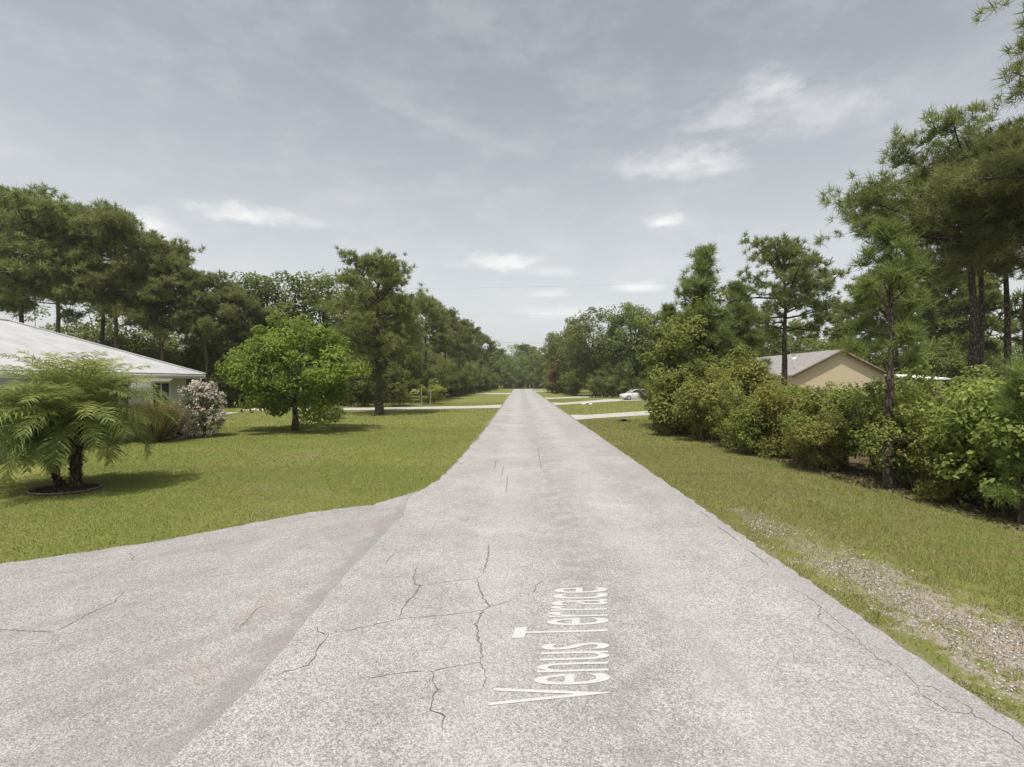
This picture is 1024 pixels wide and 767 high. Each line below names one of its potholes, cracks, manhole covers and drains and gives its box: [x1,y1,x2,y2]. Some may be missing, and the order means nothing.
crack [281,545,509,730]
crack [798,592,1024,748]
crack [0,589,127,632]
